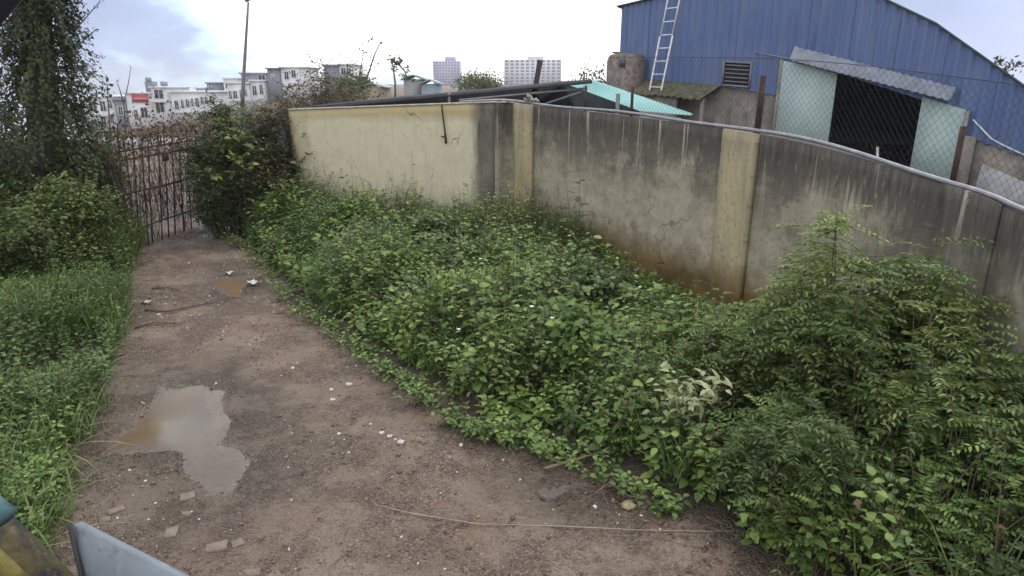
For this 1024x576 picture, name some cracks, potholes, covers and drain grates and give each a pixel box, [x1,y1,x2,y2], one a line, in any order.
pothole [100,381,257,503]
